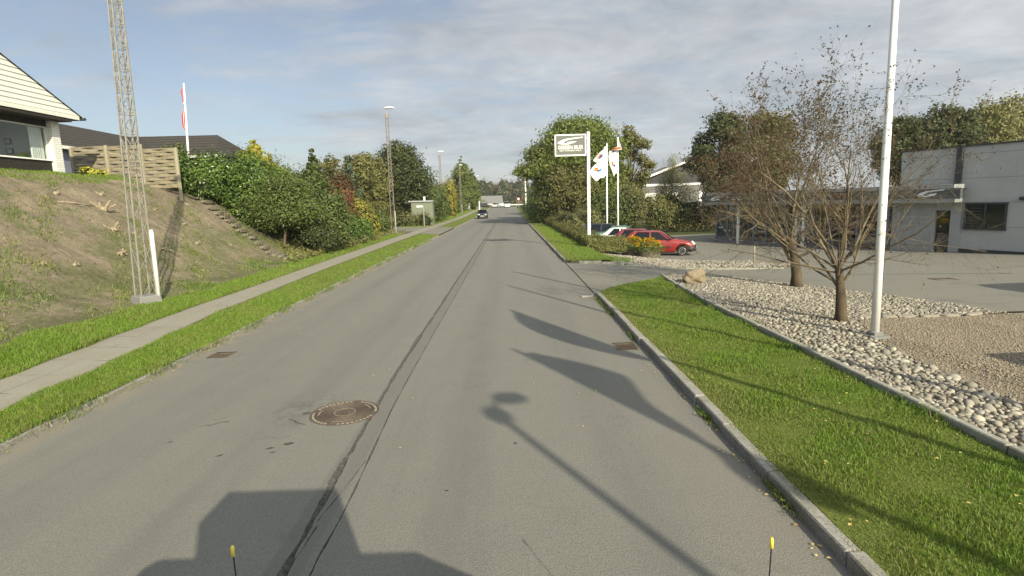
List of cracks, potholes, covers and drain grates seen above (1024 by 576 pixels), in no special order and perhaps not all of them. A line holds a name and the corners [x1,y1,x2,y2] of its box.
manhole cover [309,400,379,426]
